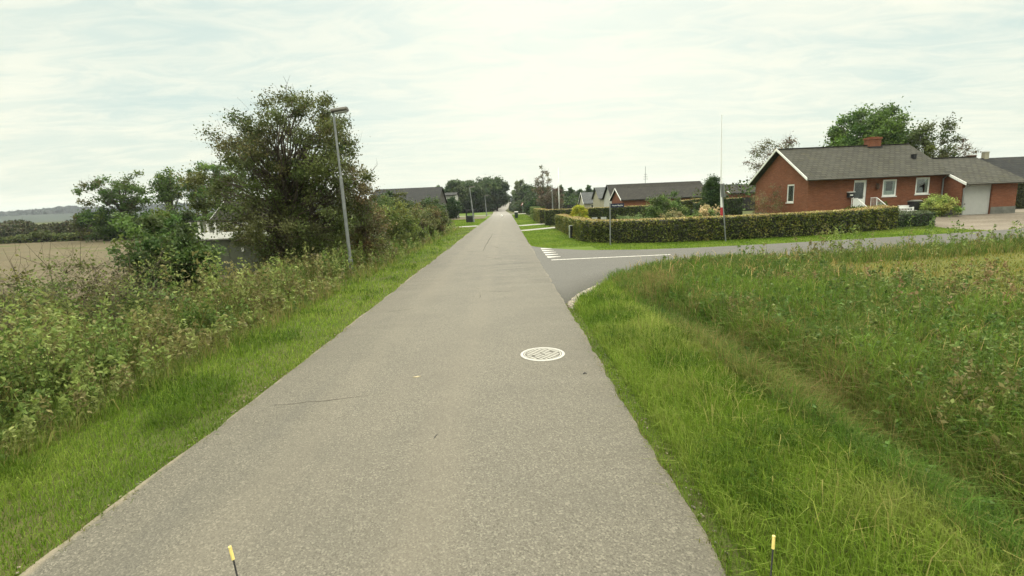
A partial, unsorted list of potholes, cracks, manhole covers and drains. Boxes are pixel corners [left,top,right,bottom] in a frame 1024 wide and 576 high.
manhole cover [520,347,565,361]
